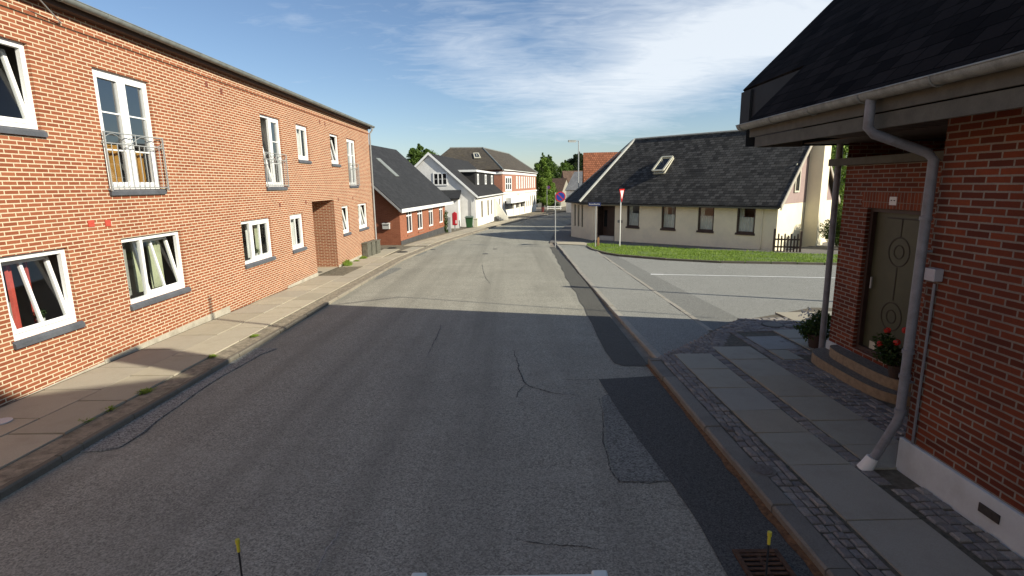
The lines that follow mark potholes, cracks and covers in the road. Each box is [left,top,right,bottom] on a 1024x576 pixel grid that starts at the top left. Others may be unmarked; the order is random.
crack [514,351,671,484]
crack [520,539,598,549]
drain grate [732,549,797,576]
